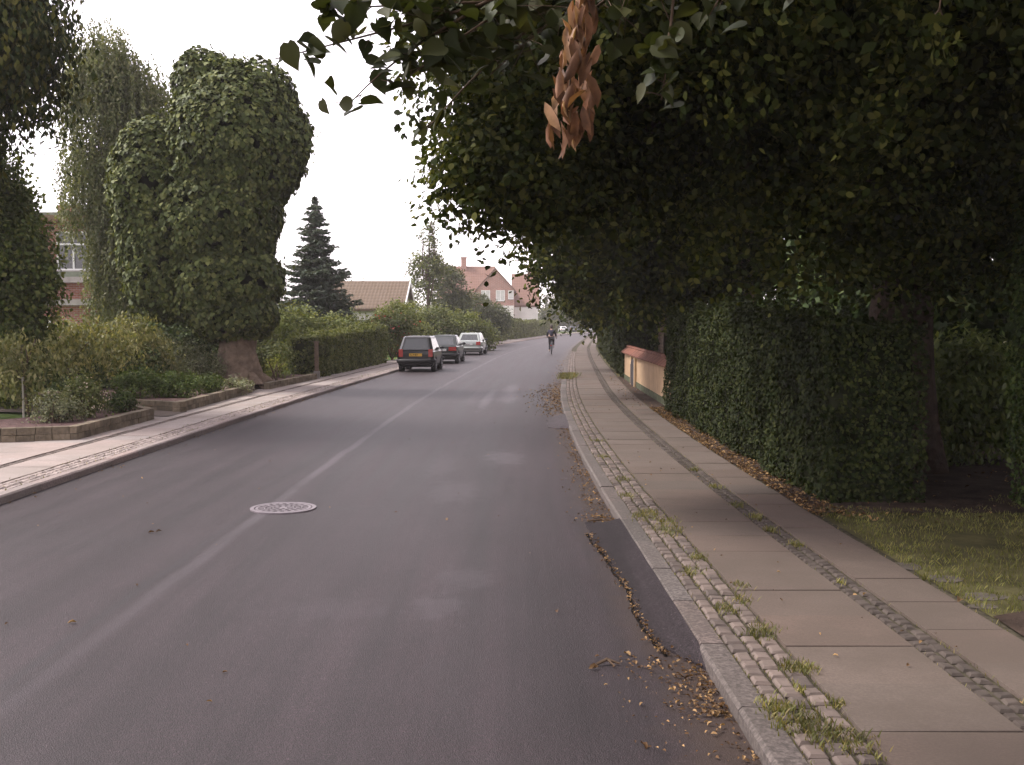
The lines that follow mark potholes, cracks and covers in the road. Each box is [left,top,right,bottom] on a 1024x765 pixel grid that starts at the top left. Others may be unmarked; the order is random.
manhole cover [250,502,316,514]
